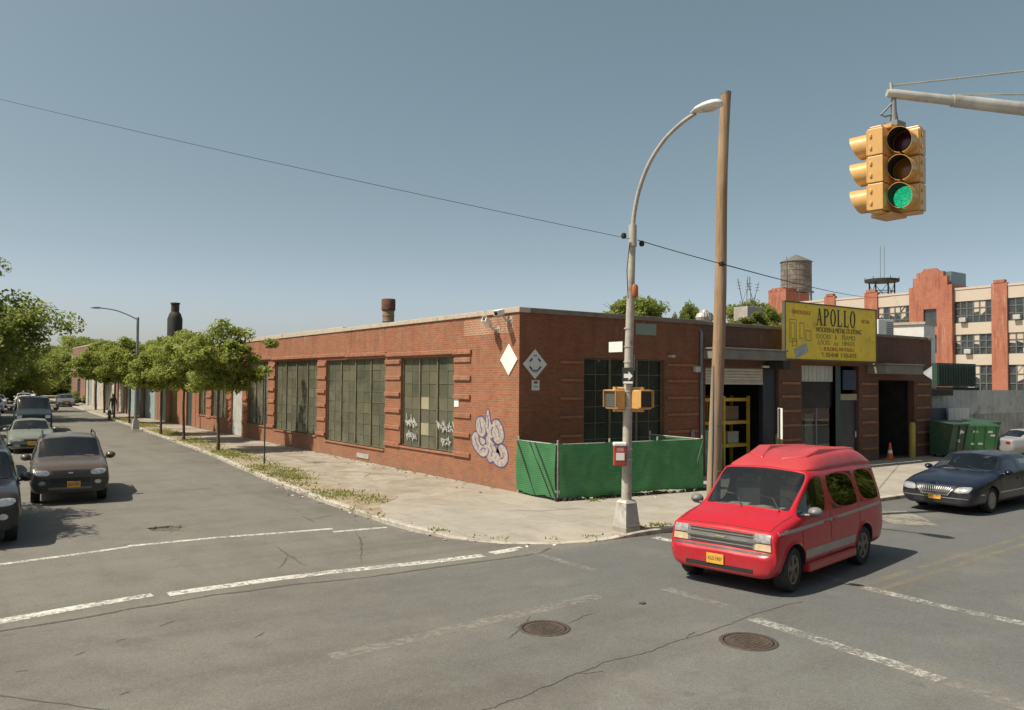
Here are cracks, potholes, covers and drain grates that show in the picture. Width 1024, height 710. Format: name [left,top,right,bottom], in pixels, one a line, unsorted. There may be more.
manhole cover [518,620,571,637]
crack [482,602,799,710]
manhole cover [718,632,779,651]
